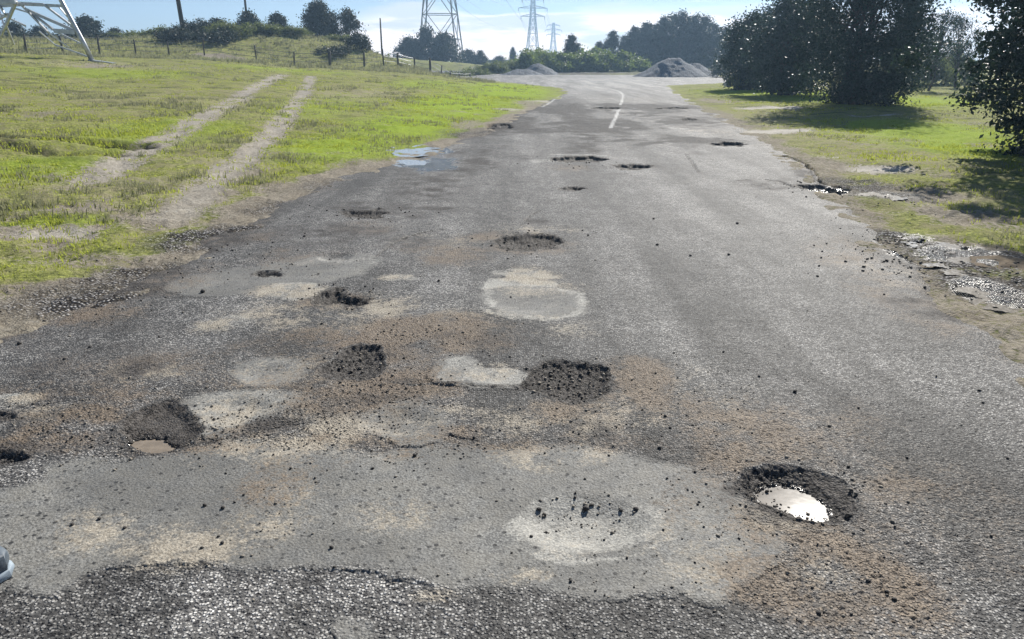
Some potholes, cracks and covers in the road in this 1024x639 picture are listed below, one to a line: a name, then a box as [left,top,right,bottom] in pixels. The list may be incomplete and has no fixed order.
pothole [338,208,394,219]
pothole [309,286,376,308]
pothole [792,184,849,196]
pothole [734,462,866,527]
pothole [610,163,656,171]
pothole [315,342,389,382]
pothole [113,399,209,455]
pothole [0,448,34,466]
pothole [490,232,566,253]
pothole [513,359,619,405]
pothole [549,155,611,163]
pothole [251,270,285,278]
